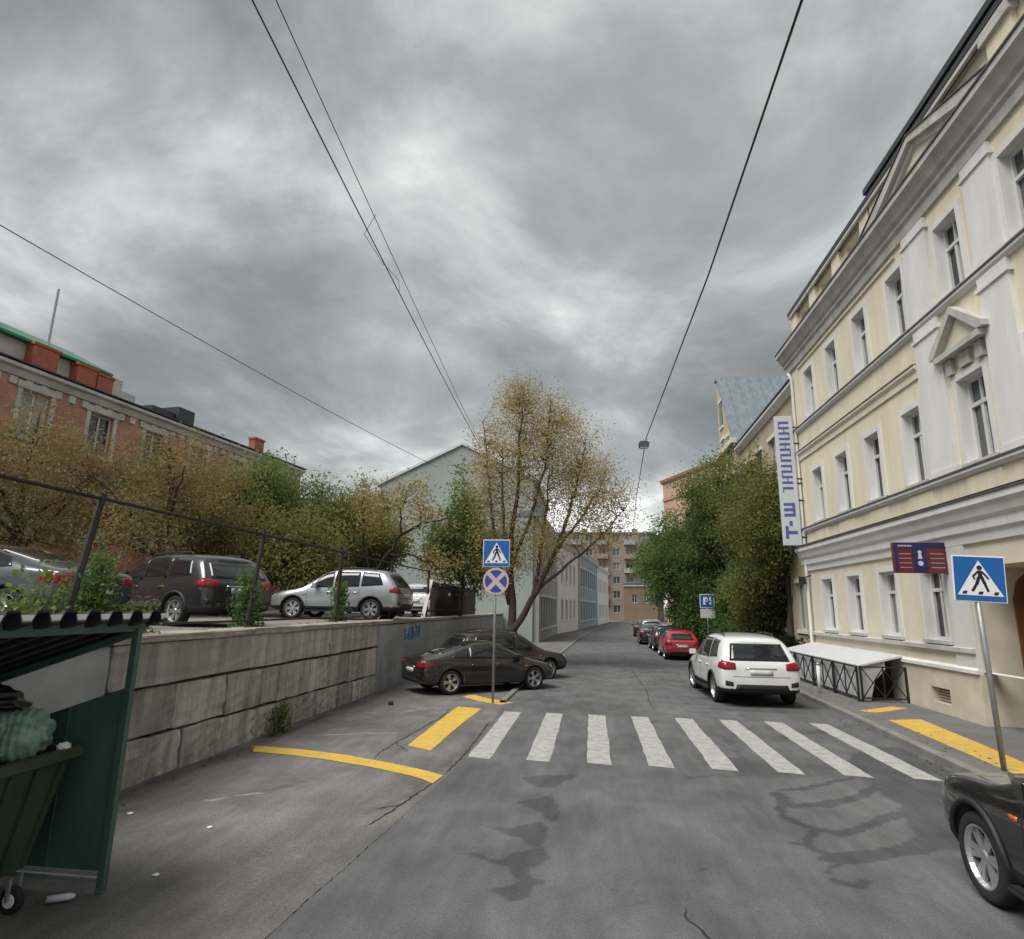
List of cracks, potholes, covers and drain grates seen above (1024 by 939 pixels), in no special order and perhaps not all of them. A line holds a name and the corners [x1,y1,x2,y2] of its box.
crack [265,708,489,939]
crack [684,908,711,939]
